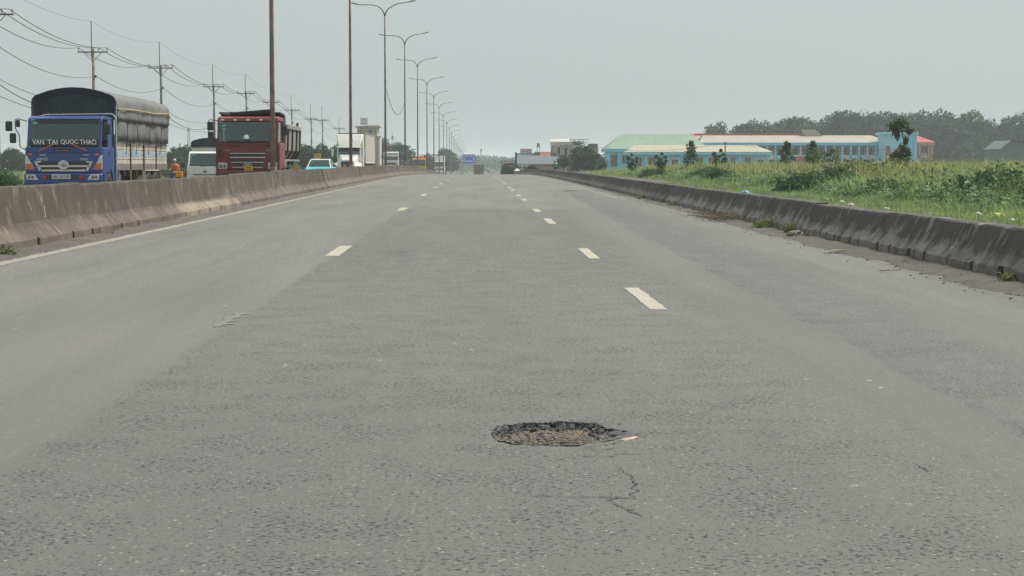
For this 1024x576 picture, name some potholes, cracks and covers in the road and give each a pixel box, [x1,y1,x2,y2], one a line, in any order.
crack [532,422,643,516]
pothole [490,421,638,447]
